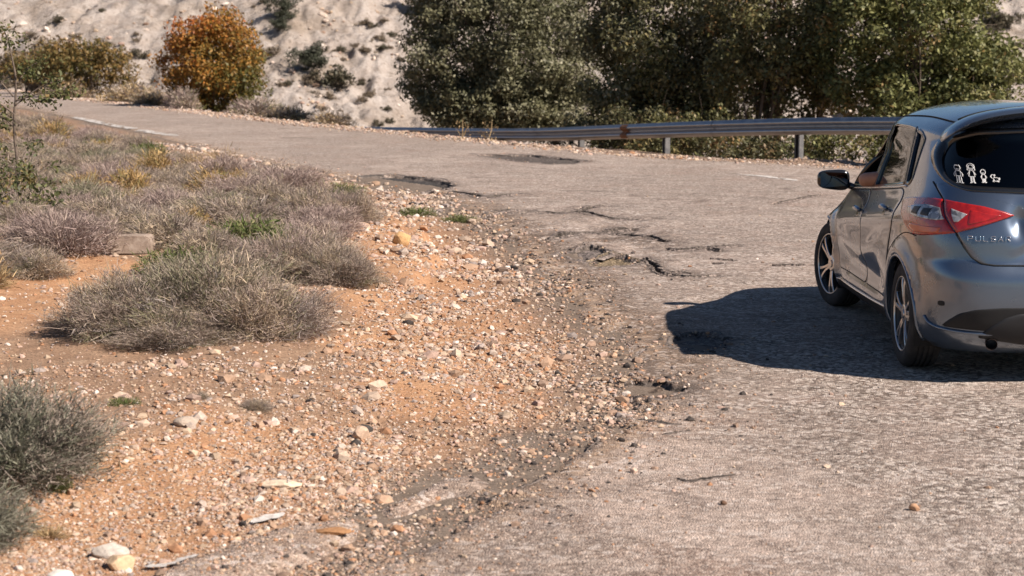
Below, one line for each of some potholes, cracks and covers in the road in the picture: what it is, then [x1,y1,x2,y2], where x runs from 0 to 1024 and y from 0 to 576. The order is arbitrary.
crack [677,474,736,482]
pothole [621,378,694,400]
pothole [469,153,584,165]
crack [774,194,822,204]
pothole [356,174,455,193]
crack [448,190,739,278]
